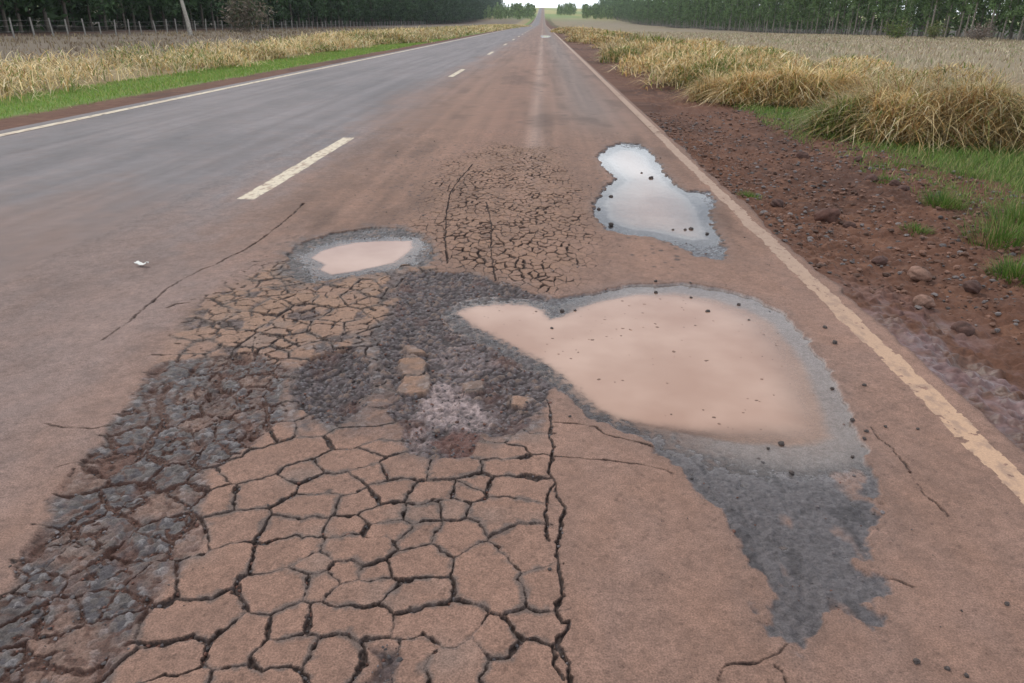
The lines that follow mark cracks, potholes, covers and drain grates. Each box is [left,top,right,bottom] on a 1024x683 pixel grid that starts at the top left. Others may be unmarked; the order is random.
pothole [375,269,555,462]
crack [0,141,675,683]
crack [870,427,951,517]
pothole [590,141,730,260]
pothole [286,346,377,427]
pothole [442,281,896,661]
crack [715,643,791,683]
pothole [281,226,437,284]
